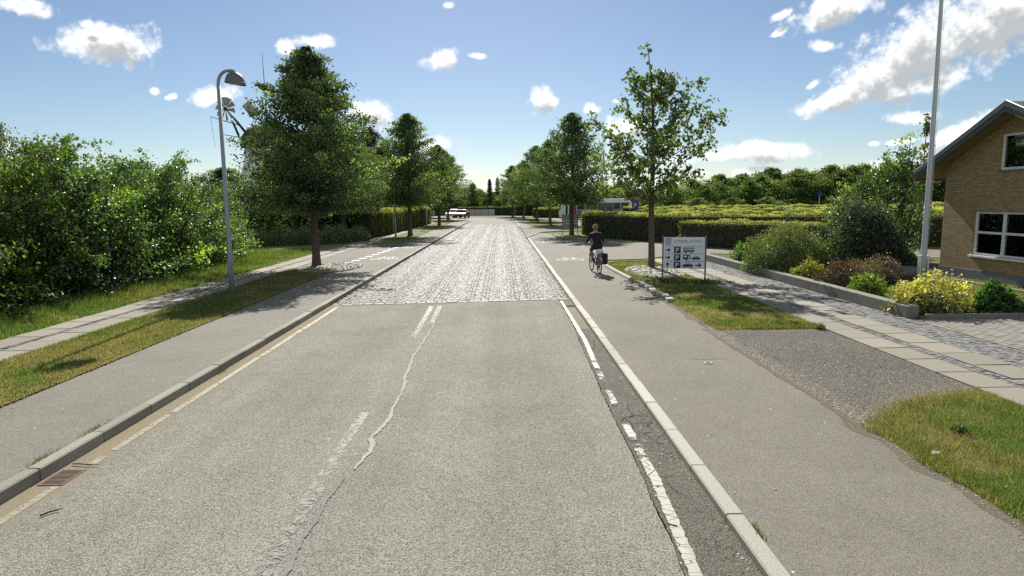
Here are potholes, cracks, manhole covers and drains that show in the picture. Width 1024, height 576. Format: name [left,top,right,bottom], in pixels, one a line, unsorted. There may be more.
crack [280,306,440,576]
drain grate [37,469,87,486]
